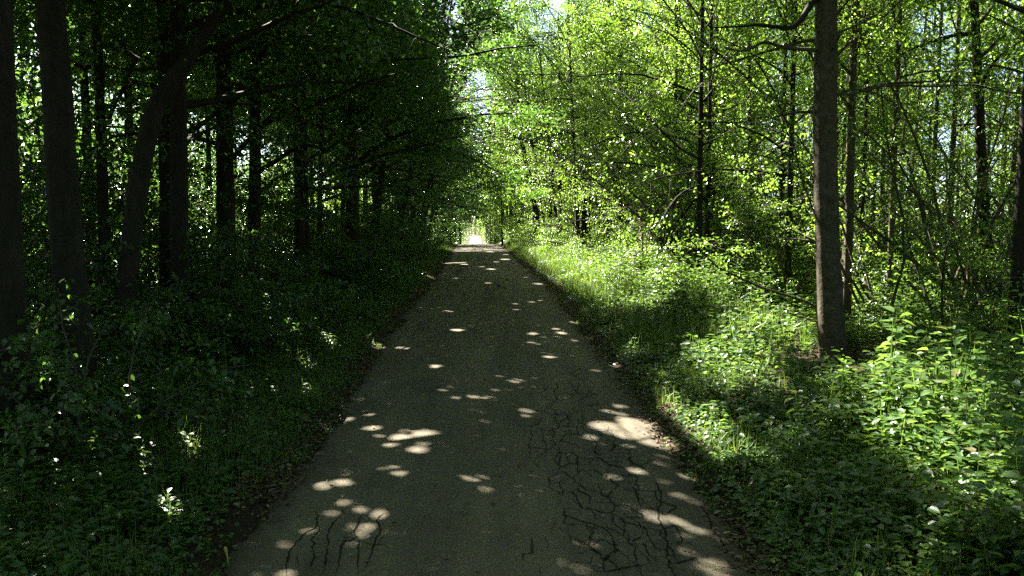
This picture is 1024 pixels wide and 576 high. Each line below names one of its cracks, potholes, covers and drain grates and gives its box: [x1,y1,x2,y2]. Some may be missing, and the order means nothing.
crack [518,368,728,576]
